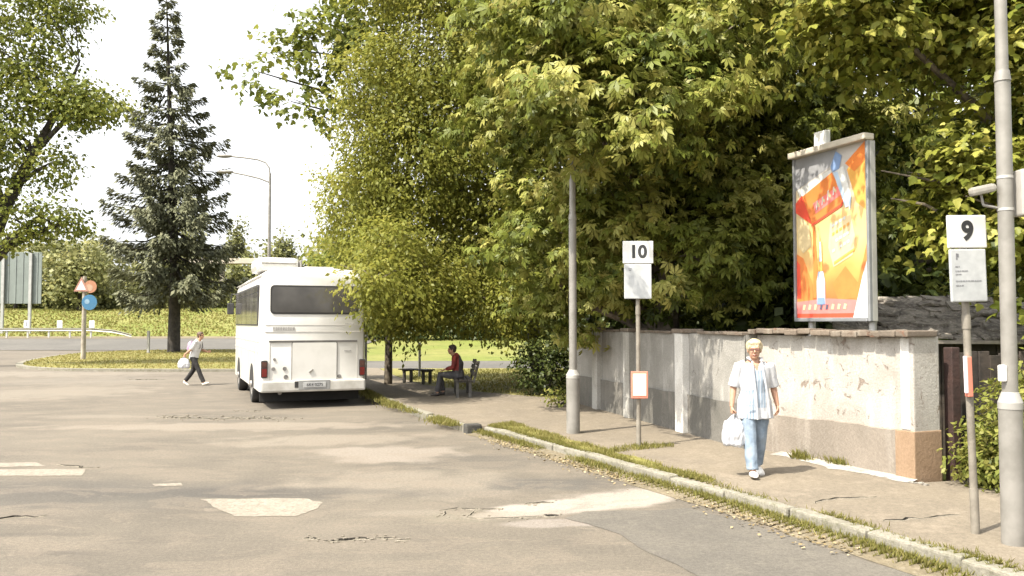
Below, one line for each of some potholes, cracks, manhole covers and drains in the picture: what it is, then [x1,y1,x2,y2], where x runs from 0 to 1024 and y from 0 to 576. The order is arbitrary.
crack [814,496,960,521]
crack [146,410,303,422]
crack [295,534,411,543]
